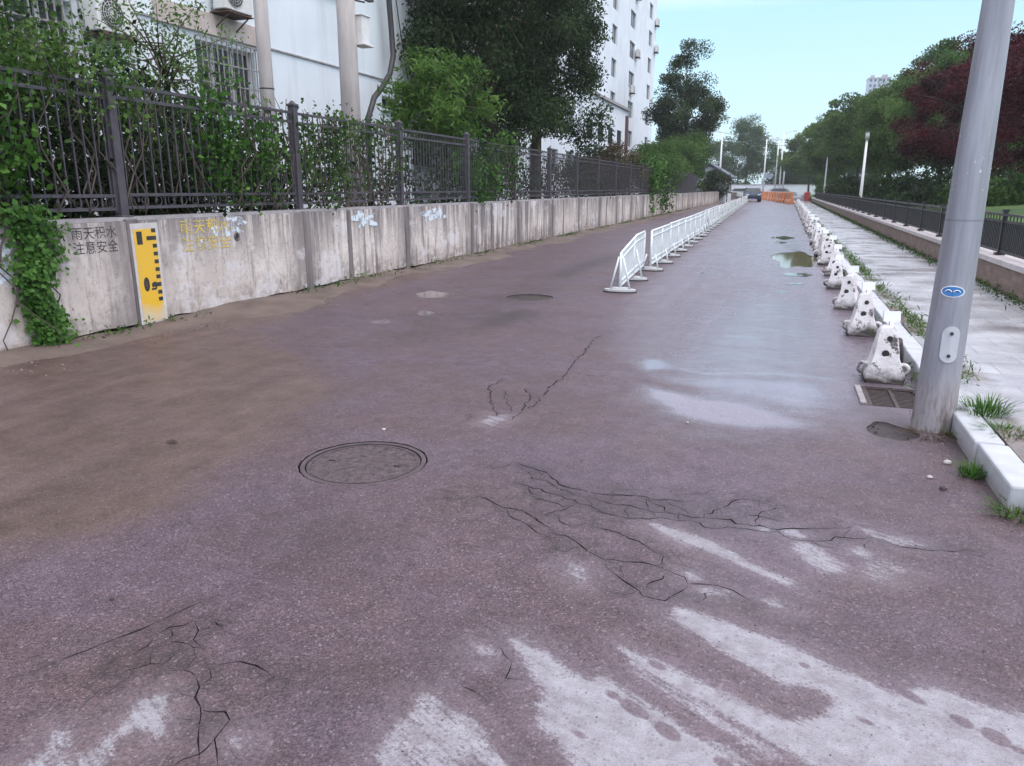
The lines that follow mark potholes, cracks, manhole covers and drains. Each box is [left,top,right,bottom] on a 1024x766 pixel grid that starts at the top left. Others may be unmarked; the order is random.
manhole cover [298,441,428,486]
drain grate [854,384,916,422]
crack [469,337,597,419]
pothole [866,421,920,441]
crack [32,603,274,766]
